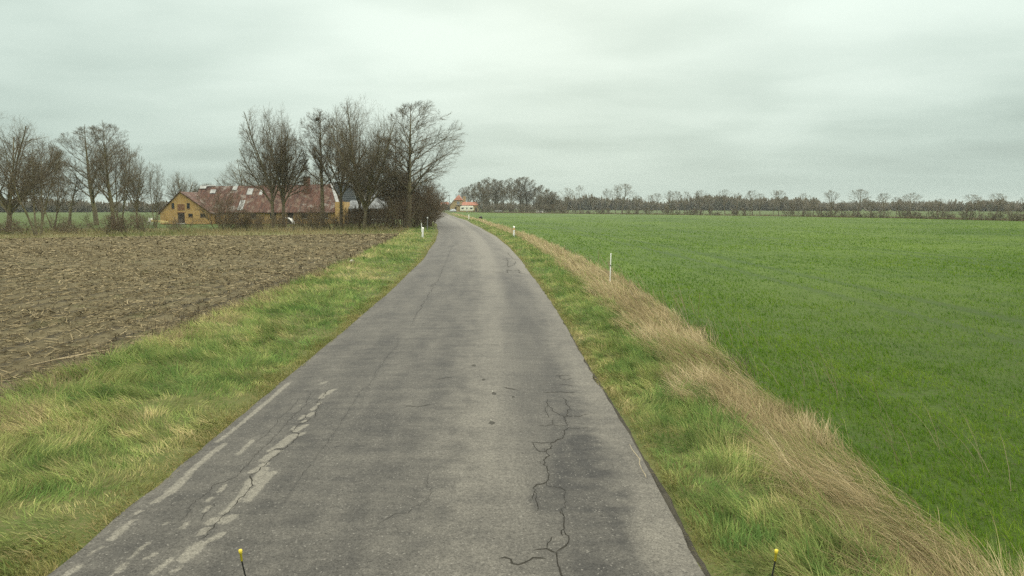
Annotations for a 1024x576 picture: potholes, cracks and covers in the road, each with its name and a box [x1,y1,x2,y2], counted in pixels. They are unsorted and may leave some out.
crack [288,244,456,498]
crack [180,389,329,538]
crack [499,375,587,576]
